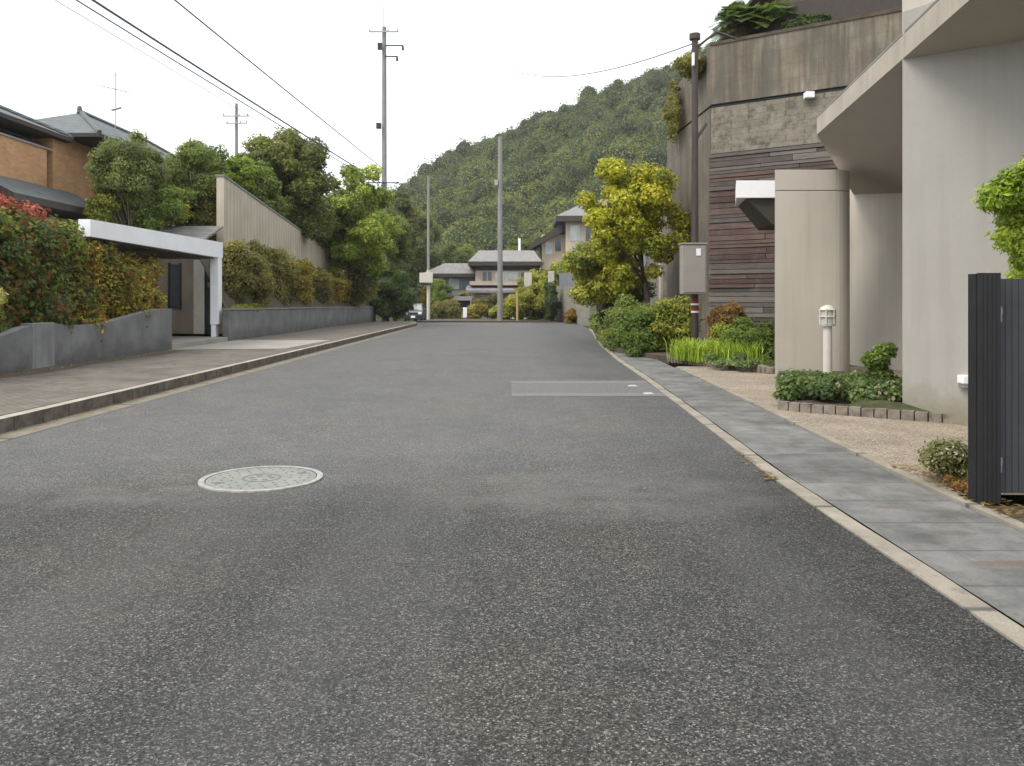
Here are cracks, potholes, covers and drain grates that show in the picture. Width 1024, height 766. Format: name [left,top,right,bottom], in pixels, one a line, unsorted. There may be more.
manhole cover [198,466,323,493]
